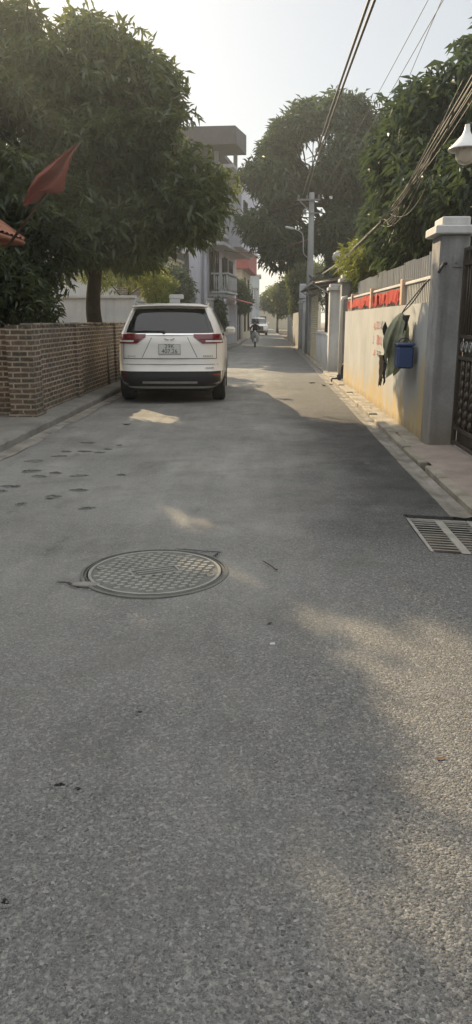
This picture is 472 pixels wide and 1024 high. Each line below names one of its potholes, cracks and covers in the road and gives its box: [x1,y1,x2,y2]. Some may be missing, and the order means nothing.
manhole cover [70,549,229,599]
drain grate [403,514,472,555]
crack [55,581,92,590]
